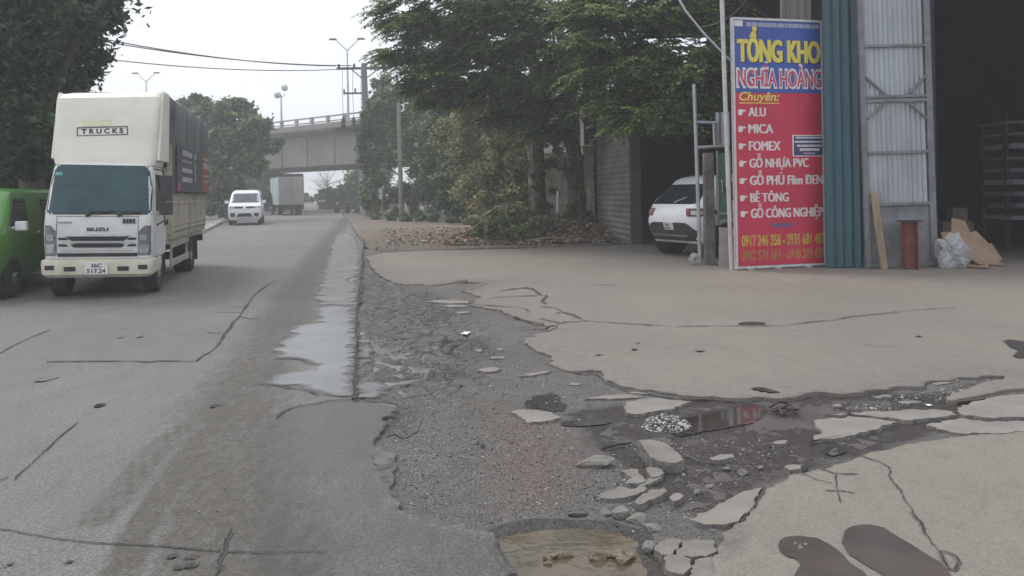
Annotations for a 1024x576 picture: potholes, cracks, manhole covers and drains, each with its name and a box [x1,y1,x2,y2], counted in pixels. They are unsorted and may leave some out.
crack [452,280,664,333]
pothole [670,404,766,436]
crack [195,281,274,361]
crack [0,422,78,481]
crack [774,455,961,571]
crack [214,528,234,576]
pothole [486,519,665,576]
